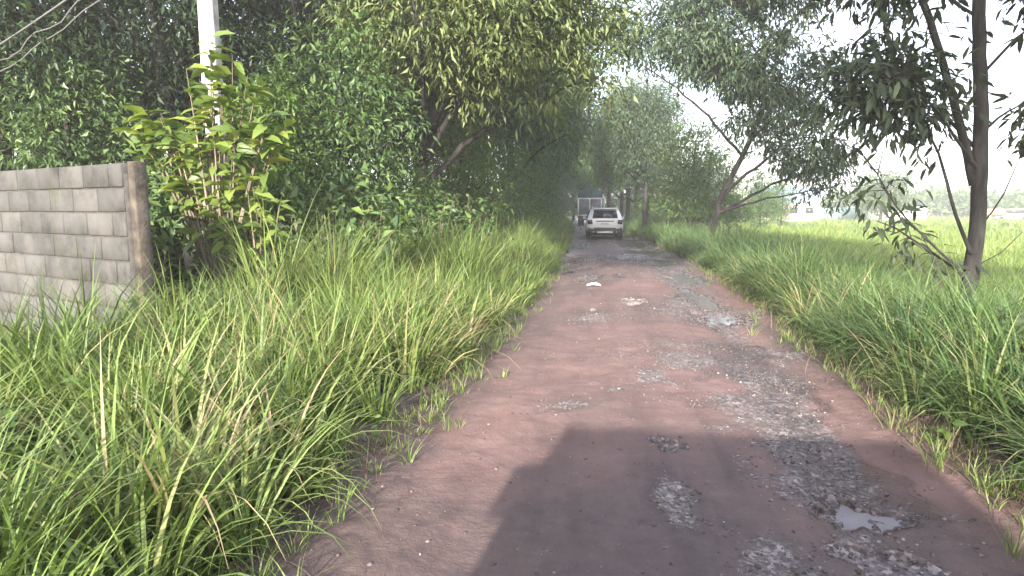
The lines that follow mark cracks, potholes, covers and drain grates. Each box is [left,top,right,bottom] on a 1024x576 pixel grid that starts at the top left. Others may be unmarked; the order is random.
pothole [659,271,708,287]
pothole [807,494,919,536]
pothole [605,253,672,261]
pothole [672,286,723,311]
pothole [647,435,690,454]
